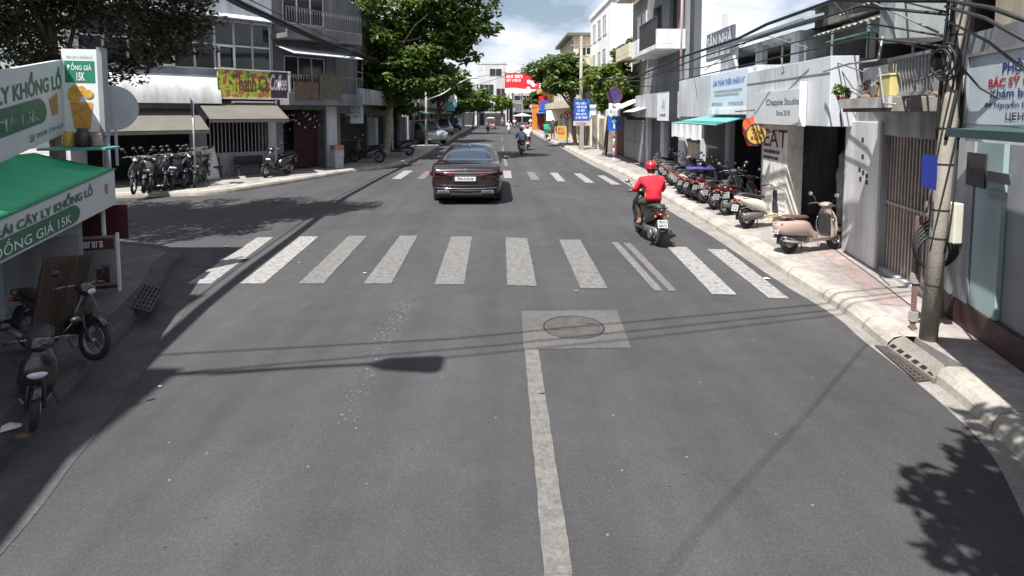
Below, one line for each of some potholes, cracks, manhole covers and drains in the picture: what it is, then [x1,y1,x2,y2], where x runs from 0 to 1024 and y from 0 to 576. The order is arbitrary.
drain grate [875,345,930,382]
manhole cover [543,315,605,339]
drain grate [129,284,163,313]
